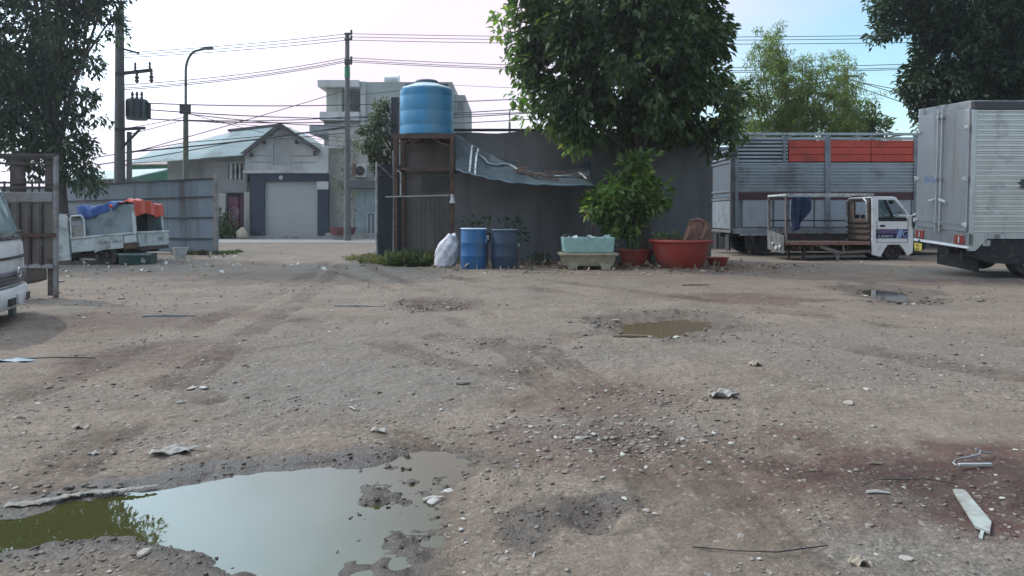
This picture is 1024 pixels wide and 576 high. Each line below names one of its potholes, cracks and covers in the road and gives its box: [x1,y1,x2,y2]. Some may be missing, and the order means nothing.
pothole [836,285,934,305]
pothole [395,298,487,312]
pothole [591,312,742,341]
pothole [554,494,633,538]
pothole [0,451,479,576]
